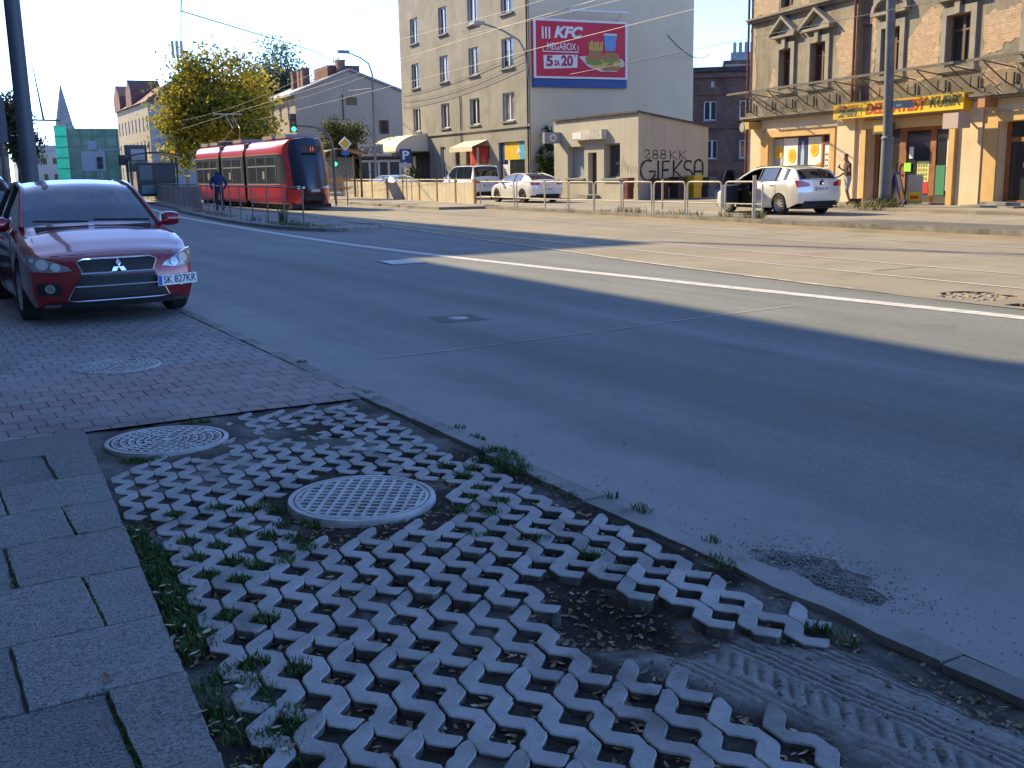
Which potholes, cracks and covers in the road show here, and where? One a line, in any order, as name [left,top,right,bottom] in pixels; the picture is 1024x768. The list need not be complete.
manhole cover [287,475,436,529]
pothole [935,291,1018,307]
manhole cover [72,358,161,374]
manhole cover [104,425,229,458]
manhole cover [429,314,486,323]
pothole [749,549,887,606]
